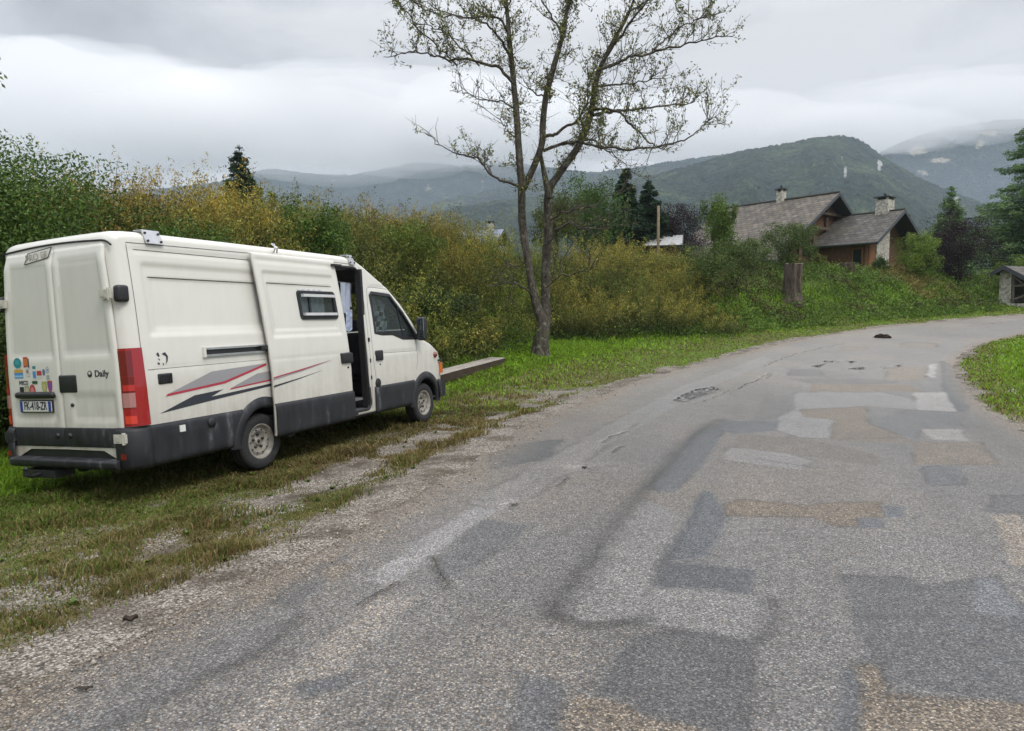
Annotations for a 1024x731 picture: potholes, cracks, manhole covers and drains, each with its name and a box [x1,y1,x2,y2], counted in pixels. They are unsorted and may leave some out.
crack [331,554,475,608]
crack [589,430,638,453]
crack [690,329,896,404]
